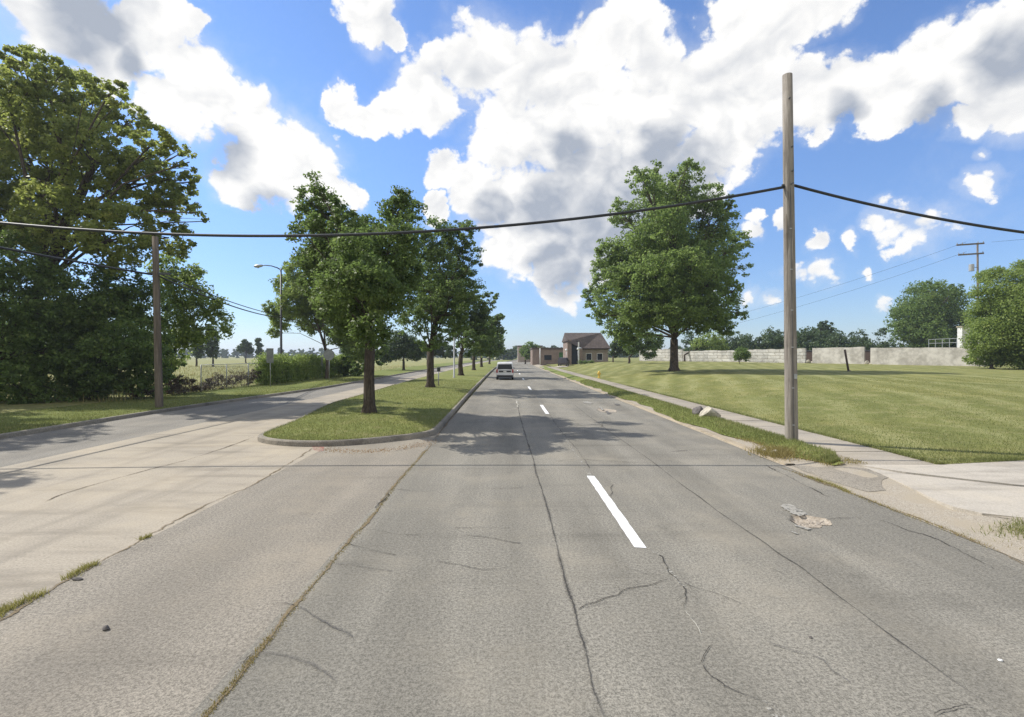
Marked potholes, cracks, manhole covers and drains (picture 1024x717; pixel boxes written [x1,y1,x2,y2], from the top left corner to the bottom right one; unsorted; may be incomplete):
pothole [790,515,832,528]
crack [579,554,759,700]
